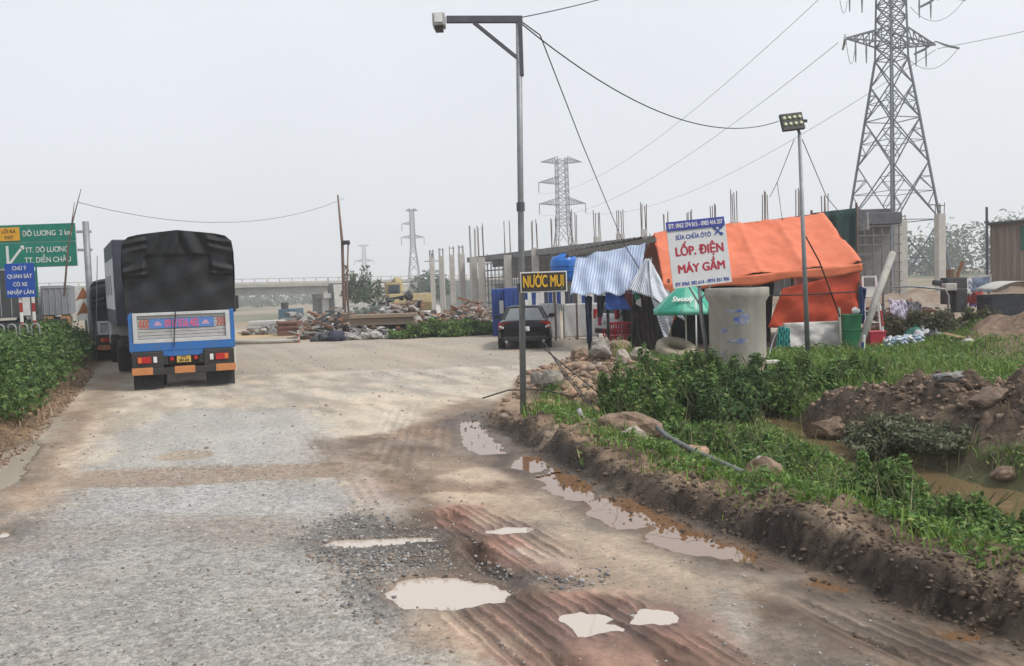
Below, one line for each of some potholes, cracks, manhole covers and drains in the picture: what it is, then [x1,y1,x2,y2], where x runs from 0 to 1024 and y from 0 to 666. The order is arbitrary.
pothole [380,575,512,611]
pothole [508,455,561,476]
pothole [320,536,439,549]
pothole [556,607,644,637]
pothole [533,470,613,511]
pothole [585,496,712,542]
pothole [629,605,683,625]
pothole [485,525,535,535]
pothole [456,420,509,455]
